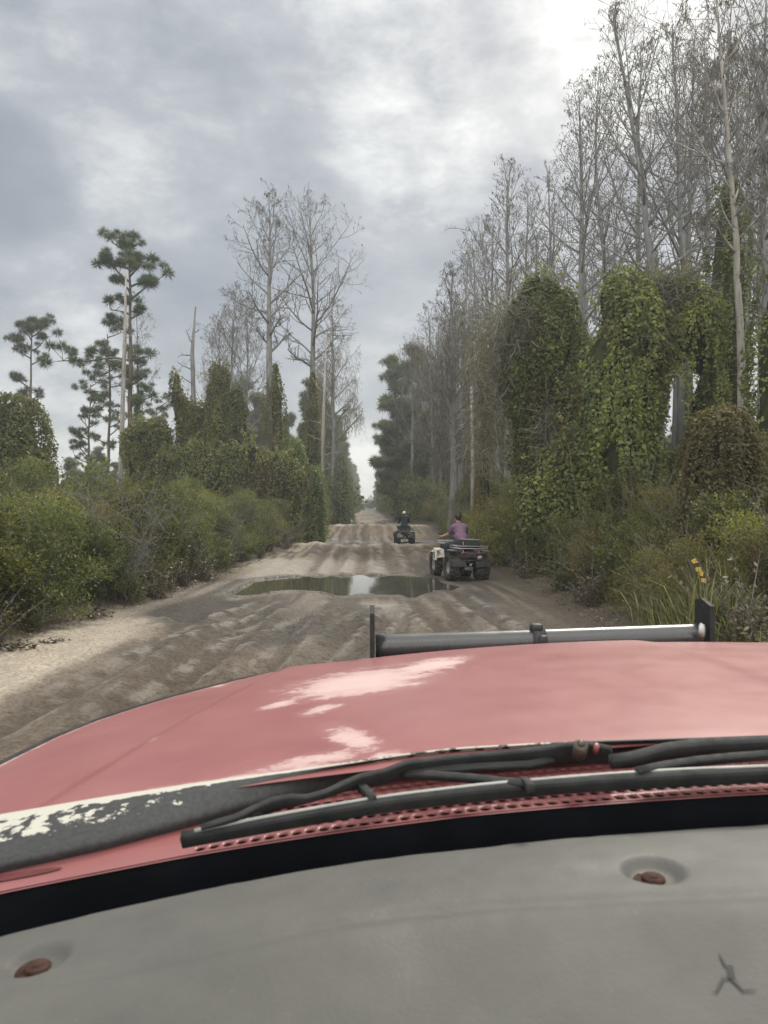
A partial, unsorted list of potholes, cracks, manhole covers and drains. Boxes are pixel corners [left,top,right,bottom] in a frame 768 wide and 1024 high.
pothole [220,572,469,600]
